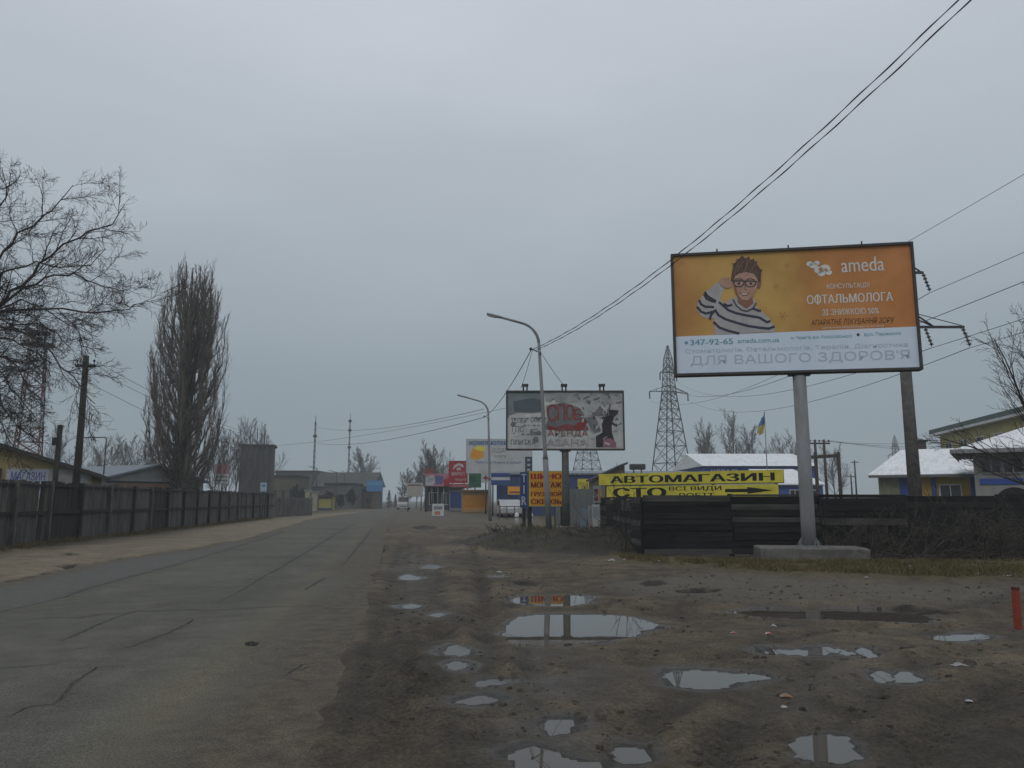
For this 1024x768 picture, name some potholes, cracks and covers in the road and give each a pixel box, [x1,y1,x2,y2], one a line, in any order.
crack [7,527,372,716]
pothole [441,644,472,656]
pothole [445,661,470,670]
pothole [456,696,498,705]
